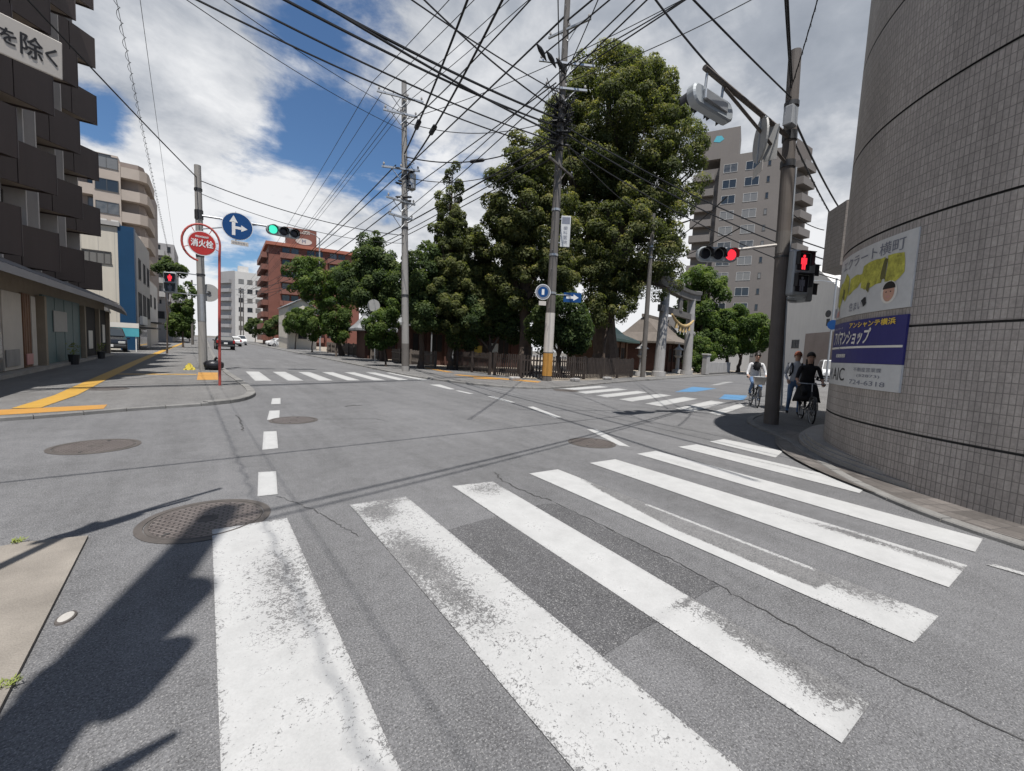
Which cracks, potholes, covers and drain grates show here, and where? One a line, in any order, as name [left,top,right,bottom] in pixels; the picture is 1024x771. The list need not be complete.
manhole cover [133,499,271,544]
manhole cover [269,416,318,424]
manhole cover [44,439,142,455]
manhole cover [568,438,616,448]
